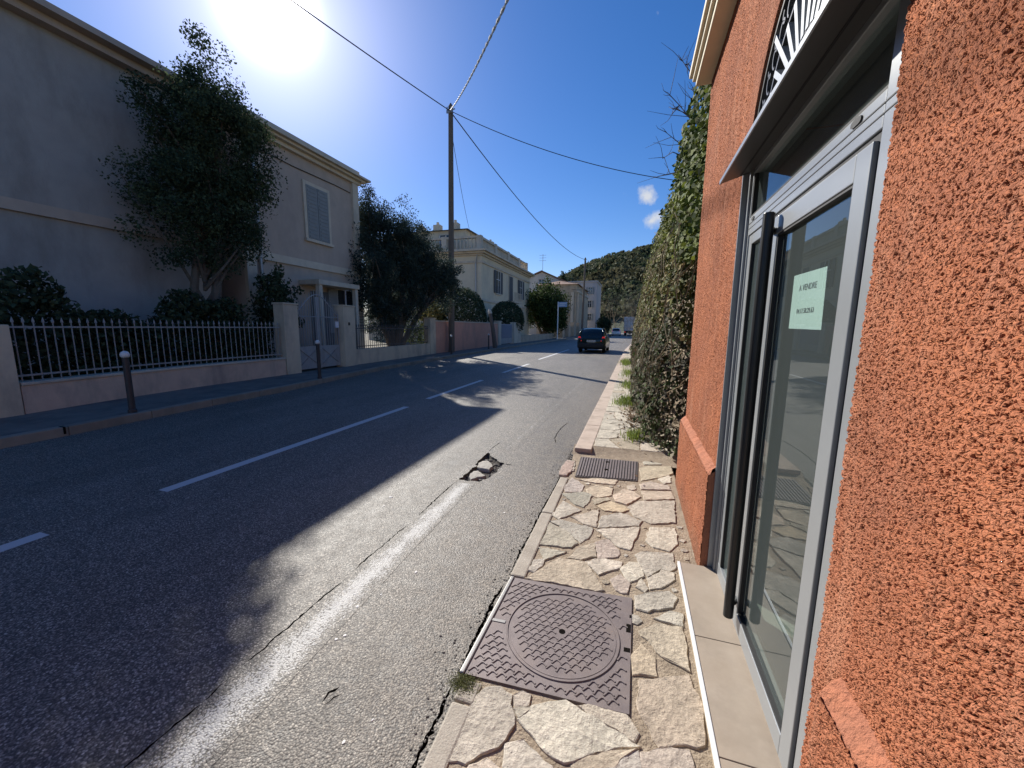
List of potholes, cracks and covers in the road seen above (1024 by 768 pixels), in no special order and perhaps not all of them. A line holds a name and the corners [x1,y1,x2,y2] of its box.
pothole [459,452,504,482]
manhole cover [459,576,632,716]
crack [322,687,341,704]
